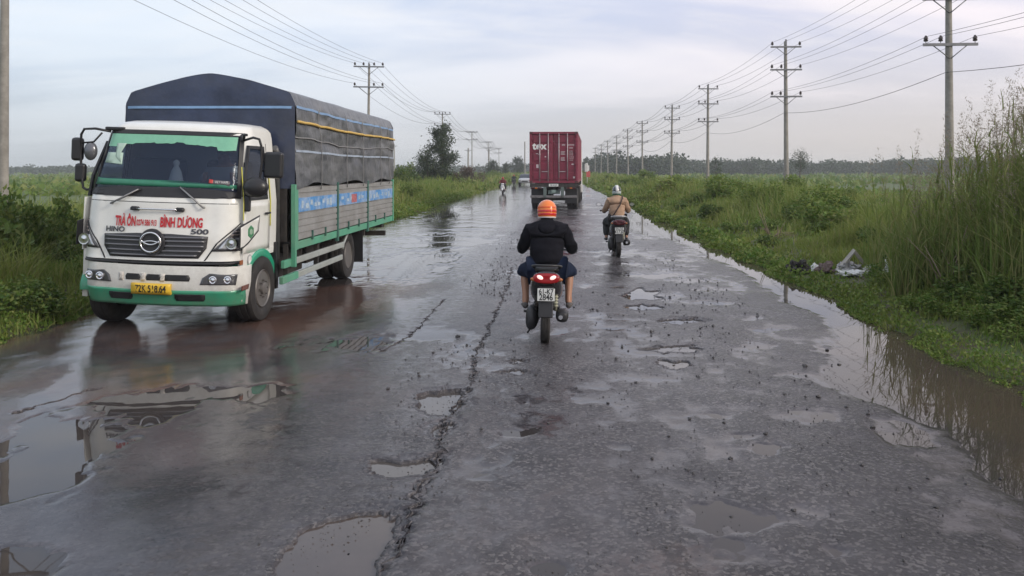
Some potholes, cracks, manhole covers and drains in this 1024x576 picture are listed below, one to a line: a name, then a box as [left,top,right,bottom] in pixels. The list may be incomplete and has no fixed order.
pothole [616,287,666,301]
pothole [650,358,696,371]
pothole [265,508,403,576]
pothole [636,344,706,354]
pothole [411,387,472,417]
pothole [361,451,451,480]
crack [378,267,514,573]
